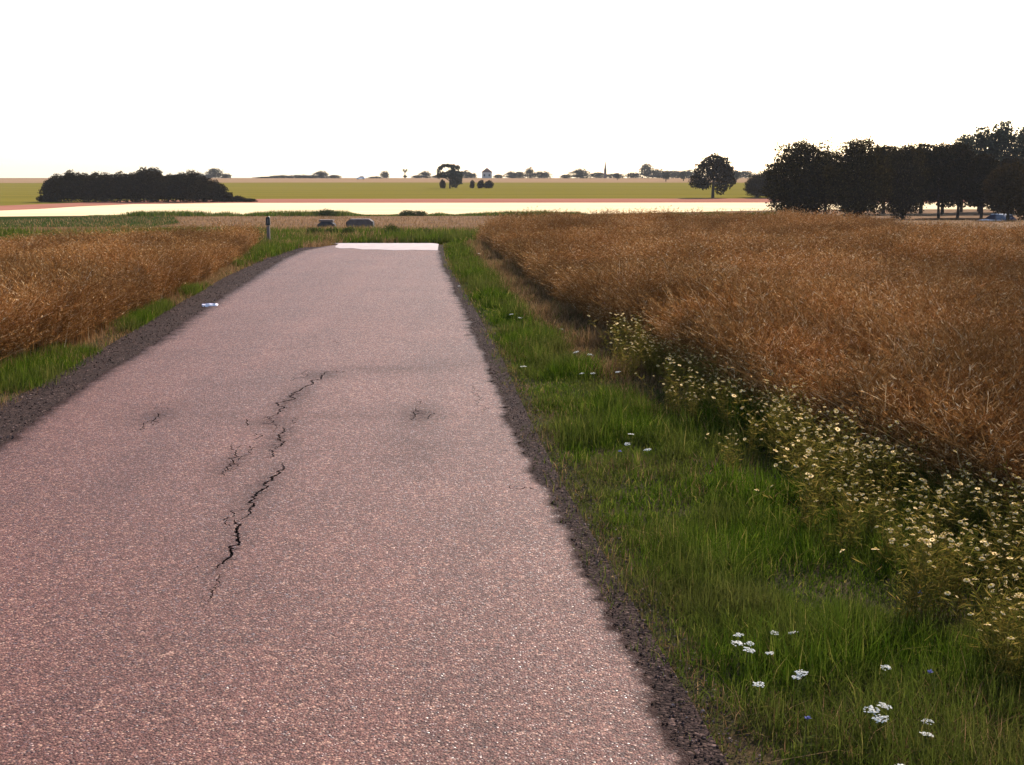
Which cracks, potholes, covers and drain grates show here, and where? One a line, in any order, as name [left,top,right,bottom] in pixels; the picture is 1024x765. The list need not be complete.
crack [187,371,337,603]
